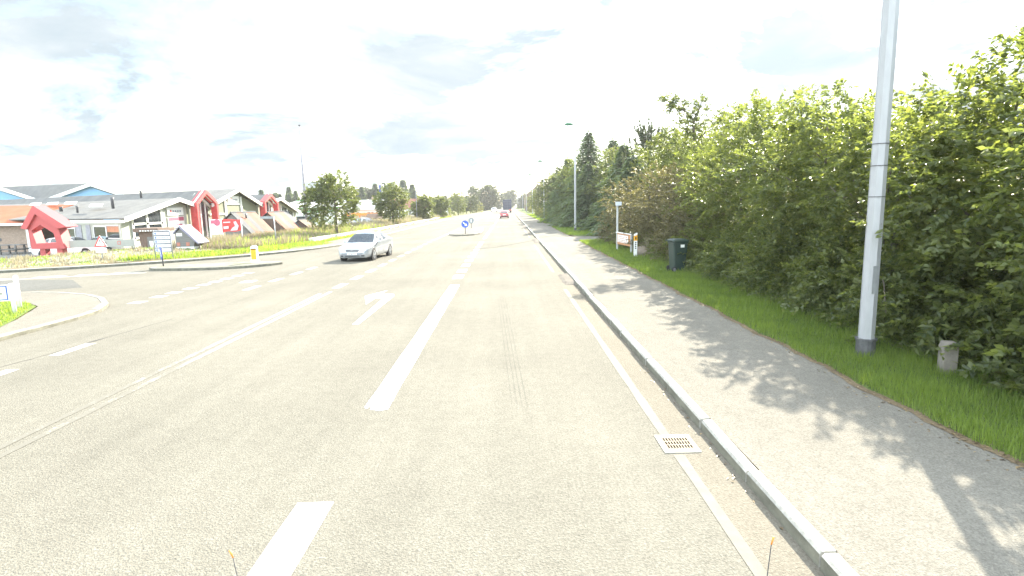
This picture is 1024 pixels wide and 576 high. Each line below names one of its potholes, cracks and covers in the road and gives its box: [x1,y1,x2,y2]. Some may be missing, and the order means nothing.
drain grate [654,434,702,453]
